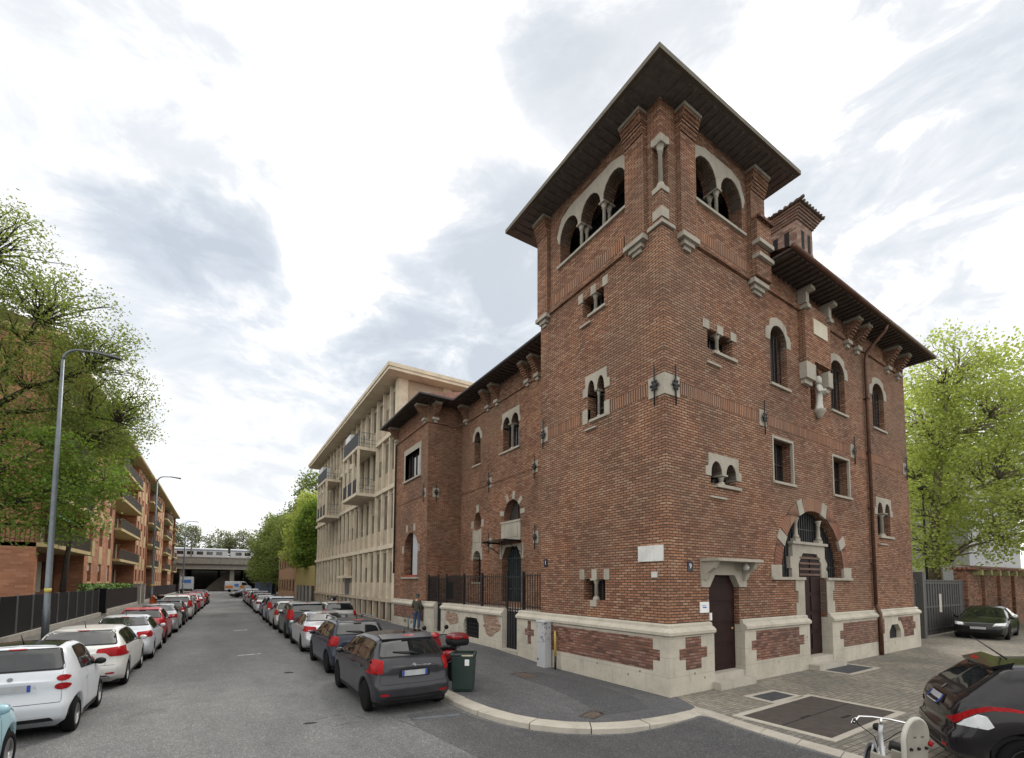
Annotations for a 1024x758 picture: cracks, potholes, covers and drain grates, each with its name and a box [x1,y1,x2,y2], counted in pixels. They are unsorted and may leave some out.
manhole cover [732,694,906,742]
manhole cover [744,690,802,704]
manhole cover [822,663,879,675]
manhole cover [578,710,606,719]
